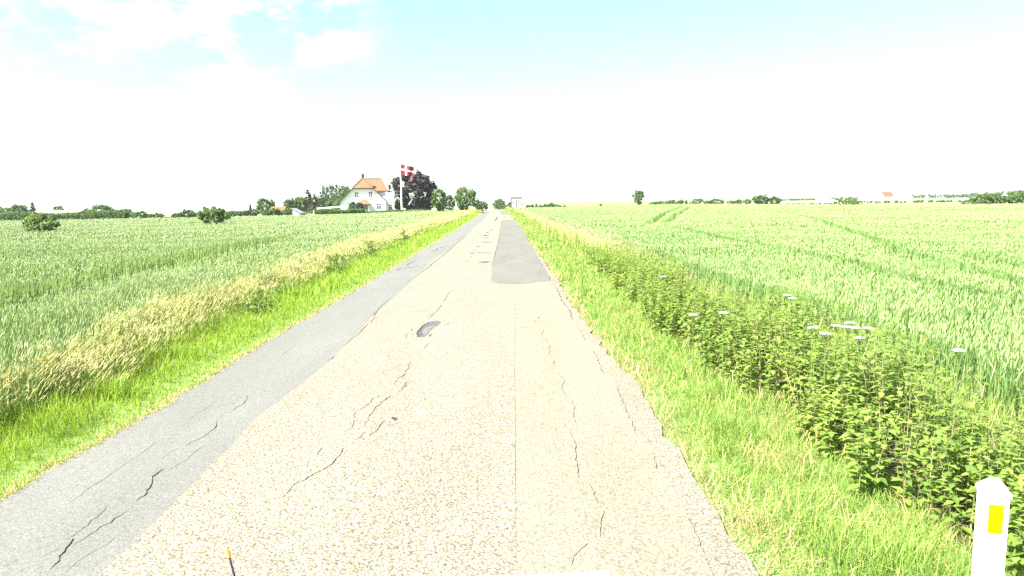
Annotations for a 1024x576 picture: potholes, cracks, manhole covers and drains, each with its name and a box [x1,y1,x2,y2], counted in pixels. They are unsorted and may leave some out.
crack [515,282,637,566]
pothole [416,321,441,337]
crack [51,396,248,569]
crack [279,292,450,516]
